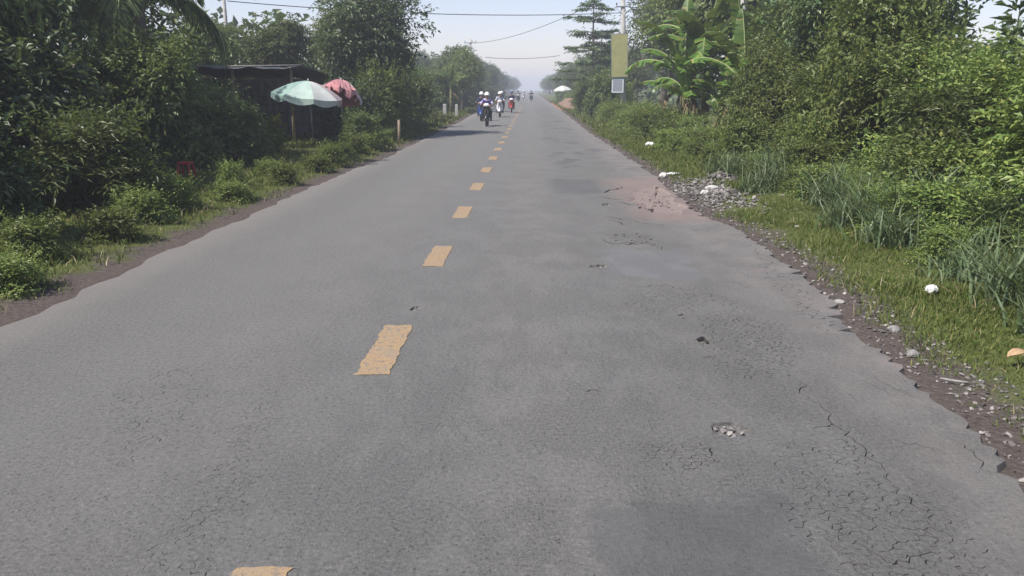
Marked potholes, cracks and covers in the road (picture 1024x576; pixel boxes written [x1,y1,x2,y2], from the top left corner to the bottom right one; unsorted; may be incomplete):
crack [772,378,989,576]
crack [626,284,802,379]
crack [104,363,215,466]
pothole [711,422,751,438]
crack [143,402,283,576]
